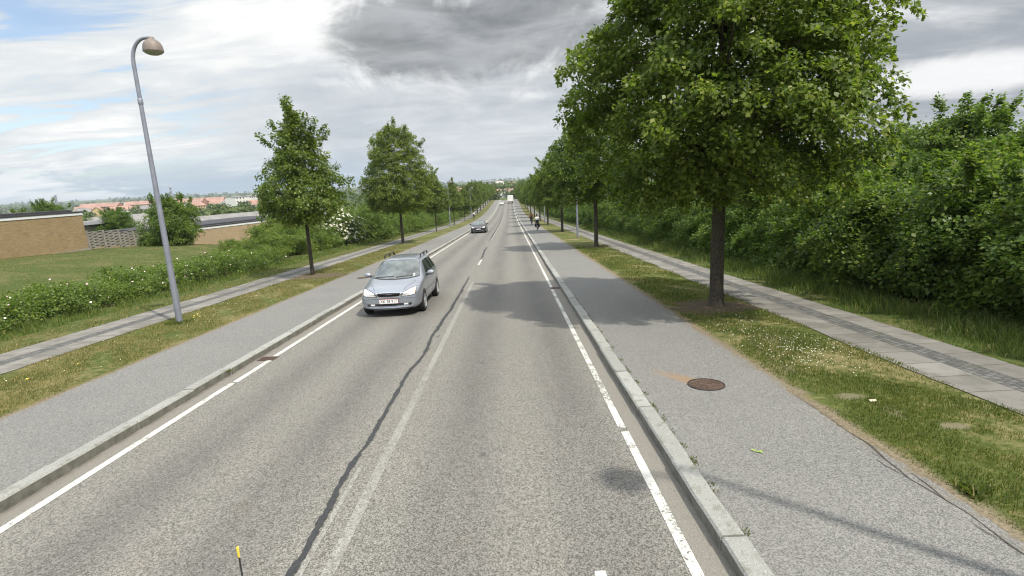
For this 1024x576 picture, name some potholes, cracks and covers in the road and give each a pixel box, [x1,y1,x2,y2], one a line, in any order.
manhole cover [687,378,725,391]
